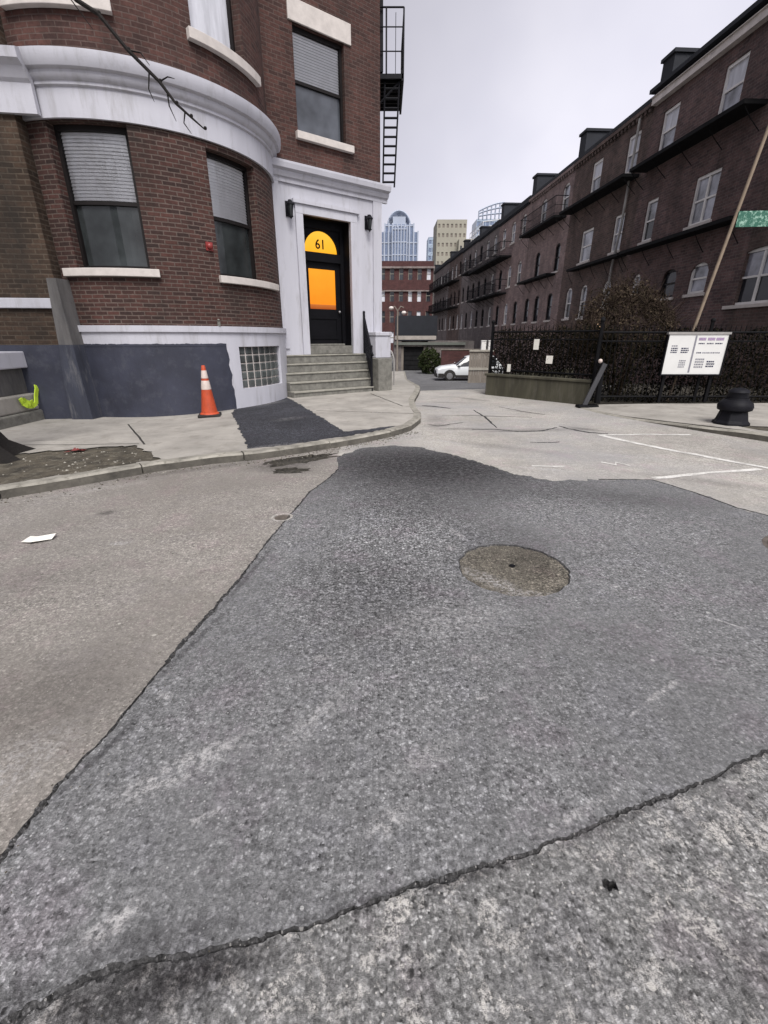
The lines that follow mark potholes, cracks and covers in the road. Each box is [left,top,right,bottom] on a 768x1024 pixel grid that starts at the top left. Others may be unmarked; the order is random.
crack [0,469,768,1024]
utility cover [271,513,293,521]
manhole cover [458,544,571,597]
